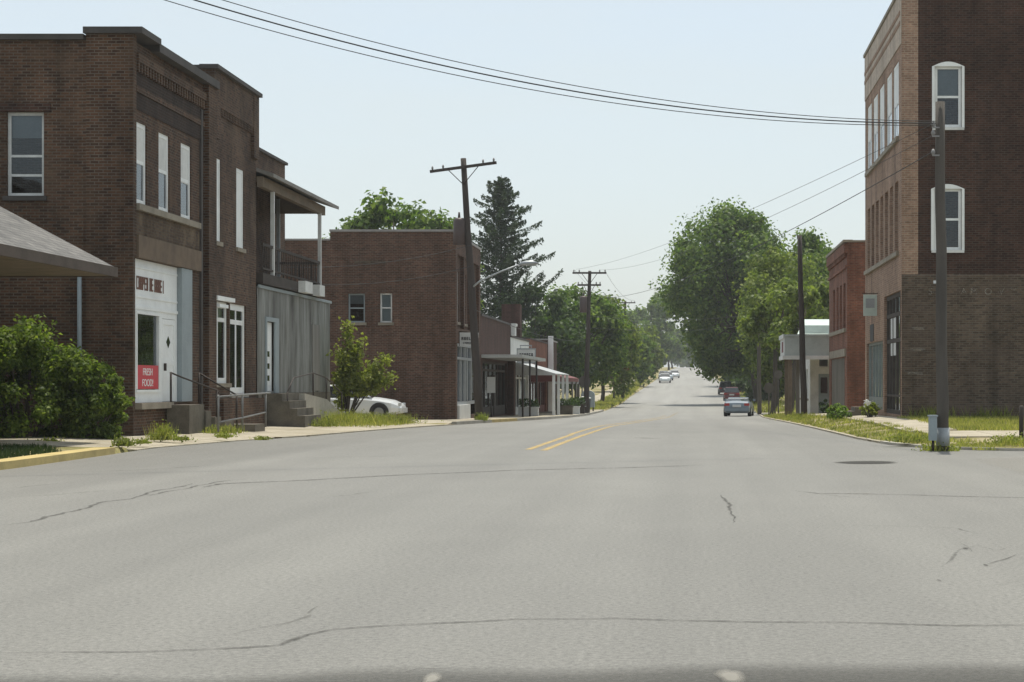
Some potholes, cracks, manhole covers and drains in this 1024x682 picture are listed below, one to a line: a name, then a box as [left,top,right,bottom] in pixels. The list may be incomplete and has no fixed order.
crack [76,618,937,652]
